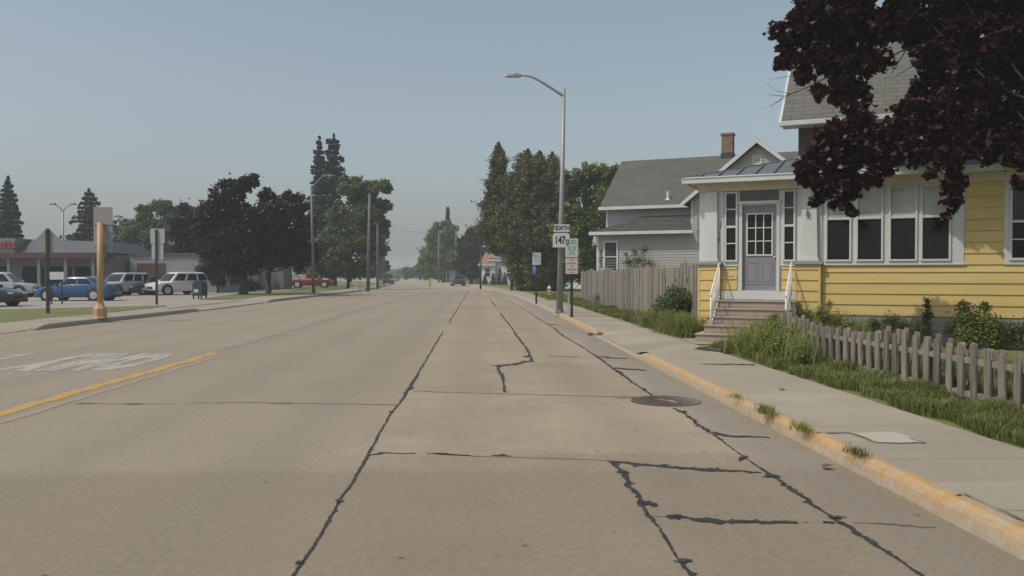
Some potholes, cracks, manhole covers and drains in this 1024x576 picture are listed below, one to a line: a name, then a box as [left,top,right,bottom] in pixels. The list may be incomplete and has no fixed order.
manhole cover [631,396,702,407]
